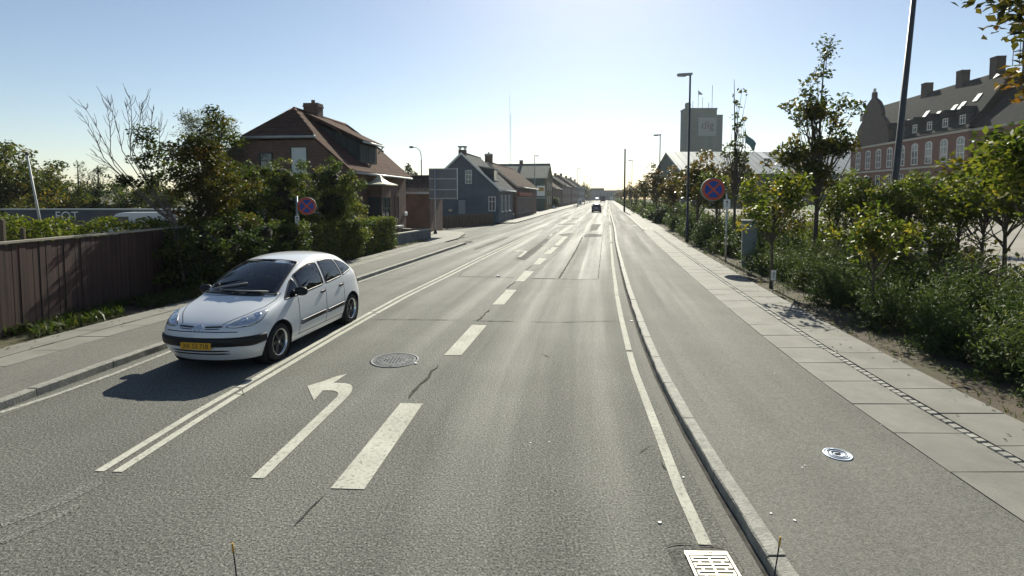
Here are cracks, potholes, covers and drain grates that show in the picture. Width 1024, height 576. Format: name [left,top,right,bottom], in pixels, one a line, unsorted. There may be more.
utility cover [822,448,853,461]
manhole cover [370,353,419,368]
drain grate [684,551,741,576]
